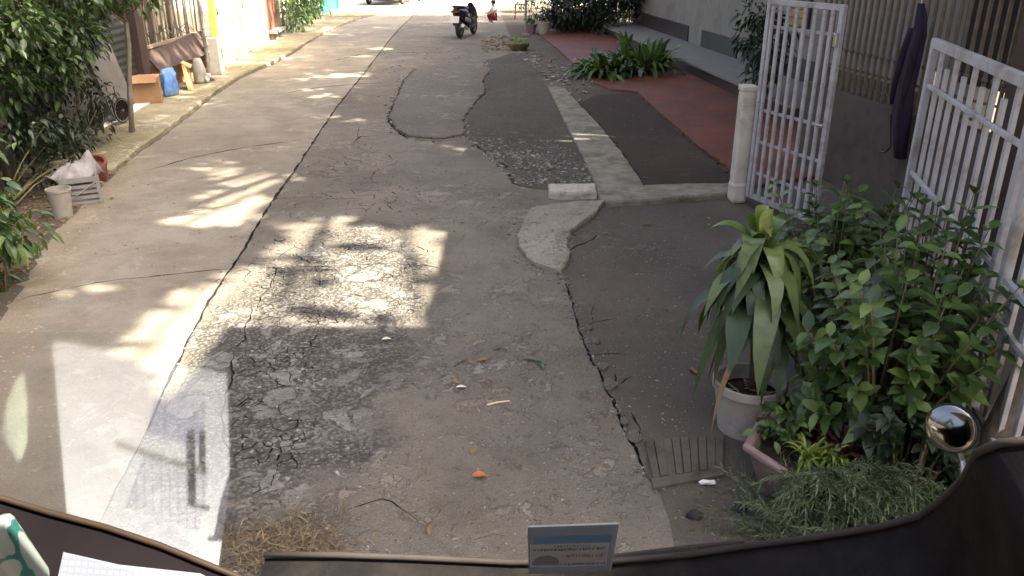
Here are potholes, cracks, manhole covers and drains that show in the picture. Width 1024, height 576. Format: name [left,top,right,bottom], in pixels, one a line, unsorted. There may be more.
crack [94,28,727,518]
